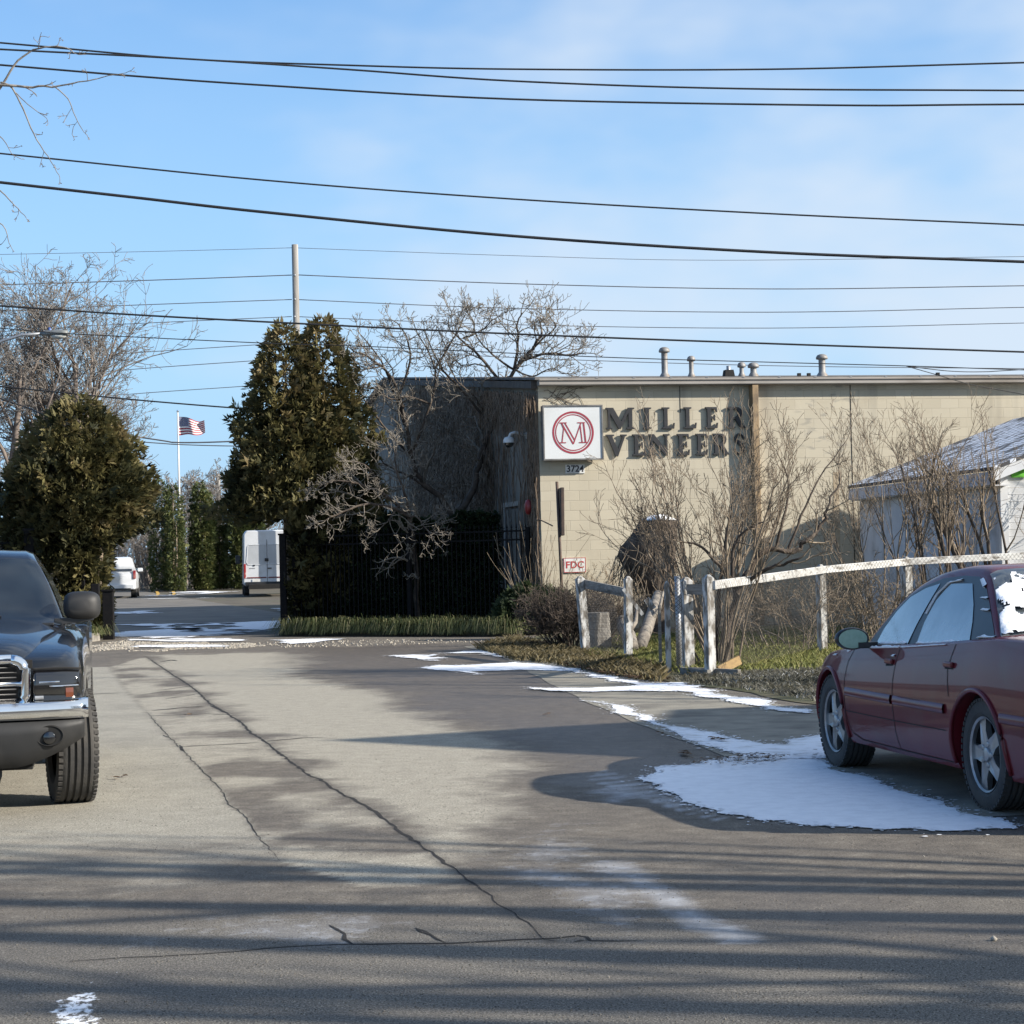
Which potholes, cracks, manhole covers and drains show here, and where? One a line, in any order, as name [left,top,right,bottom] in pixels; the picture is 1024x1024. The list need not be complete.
crack [77,657,644,961]
